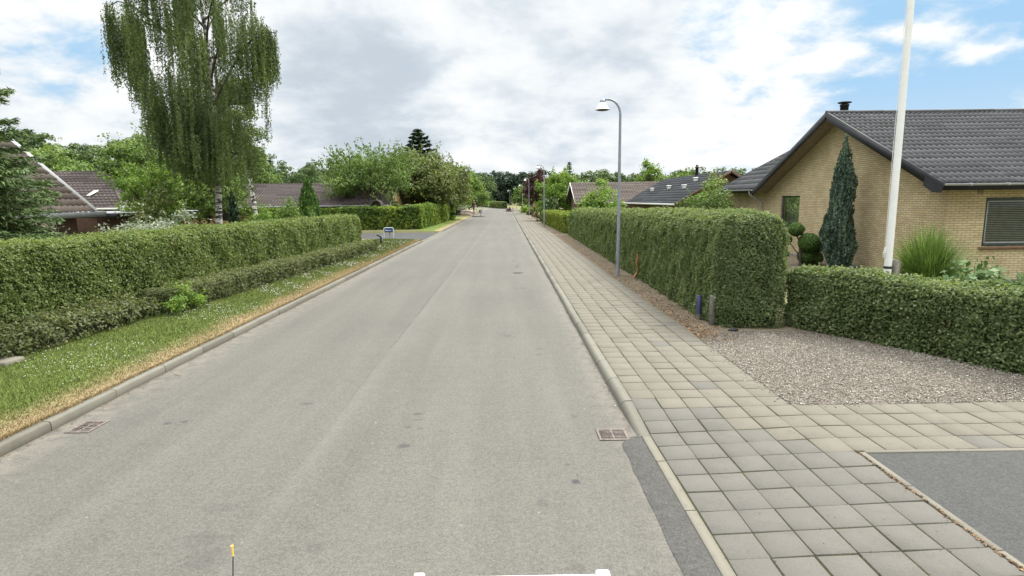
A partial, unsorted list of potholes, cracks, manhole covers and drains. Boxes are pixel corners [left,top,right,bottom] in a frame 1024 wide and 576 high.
drain grate [595,428,630,441]
drain grate [64,420,110,433]
